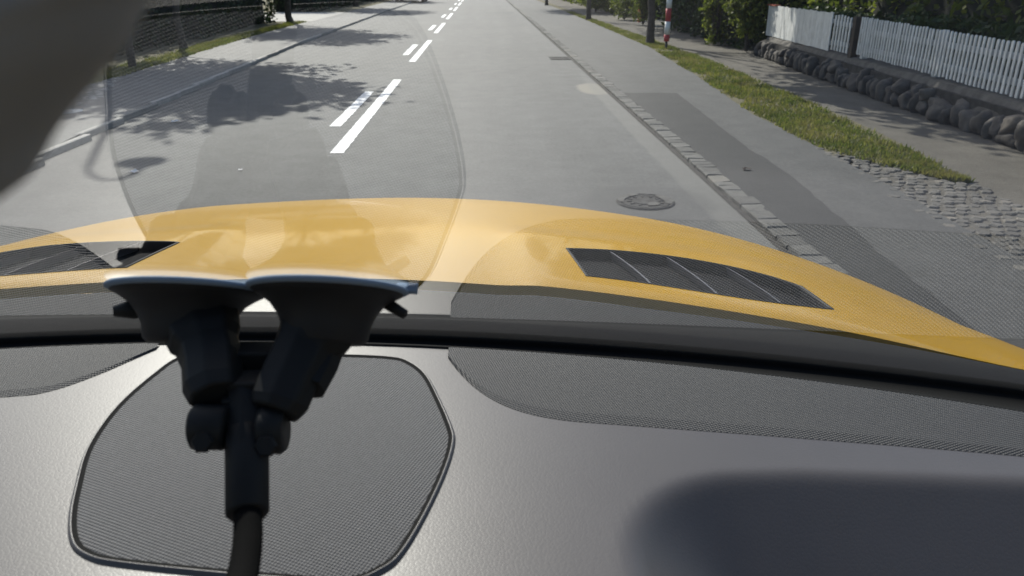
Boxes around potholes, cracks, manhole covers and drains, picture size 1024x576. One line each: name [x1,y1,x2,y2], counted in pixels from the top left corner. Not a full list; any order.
manhole cover [616,193,675,210]
